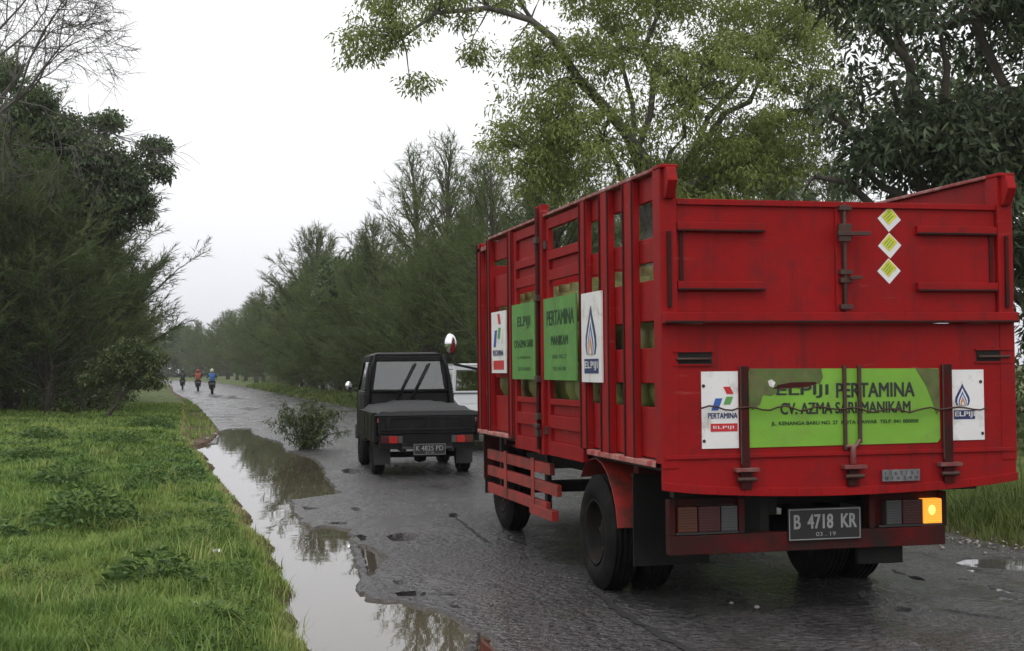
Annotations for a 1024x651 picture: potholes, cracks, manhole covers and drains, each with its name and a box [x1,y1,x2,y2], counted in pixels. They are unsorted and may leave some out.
pothole [240,500,362,586]
pothole [386,532,420,542]
crack [456,517,489,542]
pothole [358,544,389,576]
pothole [953,557,1024,570]
pothole [280,584,478,651]
